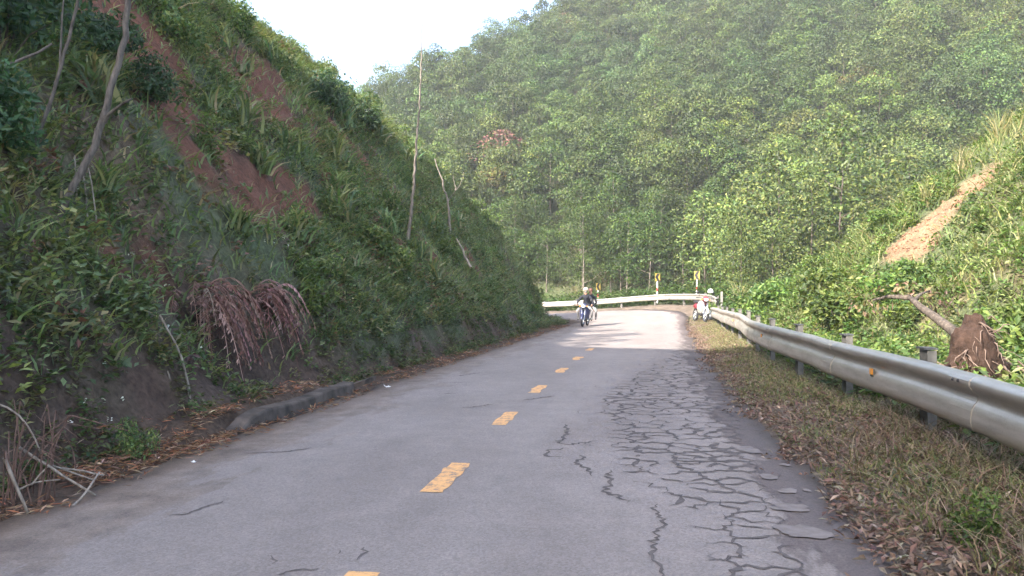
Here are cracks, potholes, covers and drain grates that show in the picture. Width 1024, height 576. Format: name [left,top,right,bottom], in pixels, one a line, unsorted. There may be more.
crack [543,341,825,576]
crack [271,556,318,575]
